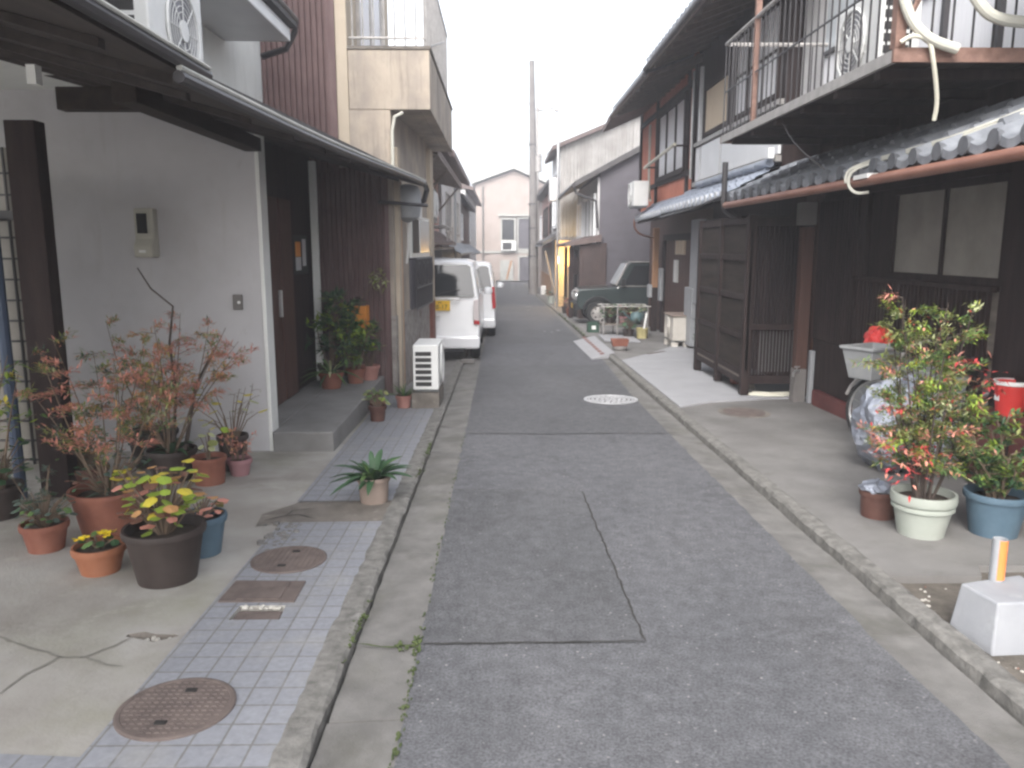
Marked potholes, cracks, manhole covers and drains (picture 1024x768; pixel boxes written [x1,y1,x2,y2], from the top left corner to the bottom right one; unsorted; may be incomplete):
manhole cover [250,546,327,574]
manhole cover [113,677,237,742]
pothole [126,632,178,642]
crack [0,636,132,694]
manhole cover [218,580,306,603]
manhole cover [718,407,771,418]
manhole cover [584,395,638,404]
